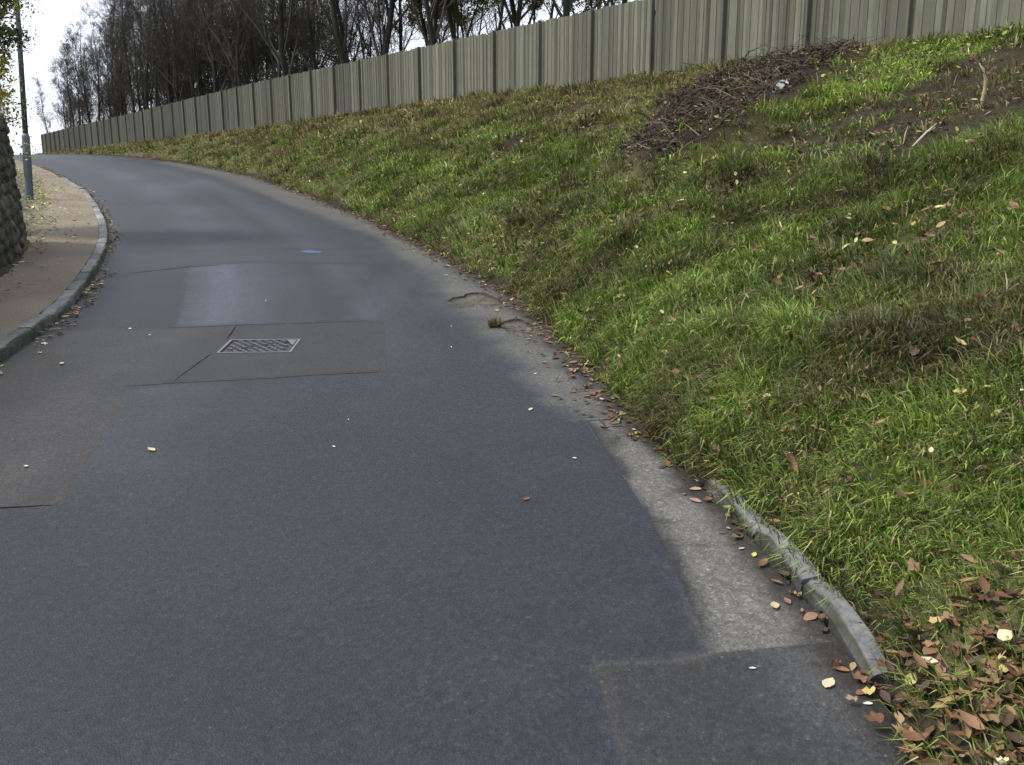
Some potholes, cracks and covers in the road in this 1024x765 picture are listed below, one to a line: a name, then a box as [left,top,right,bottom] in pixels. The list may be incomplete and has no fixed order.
crack [128,321,374,387]
pothole [501,319,534,336]
pothole [447,292,503,308]
